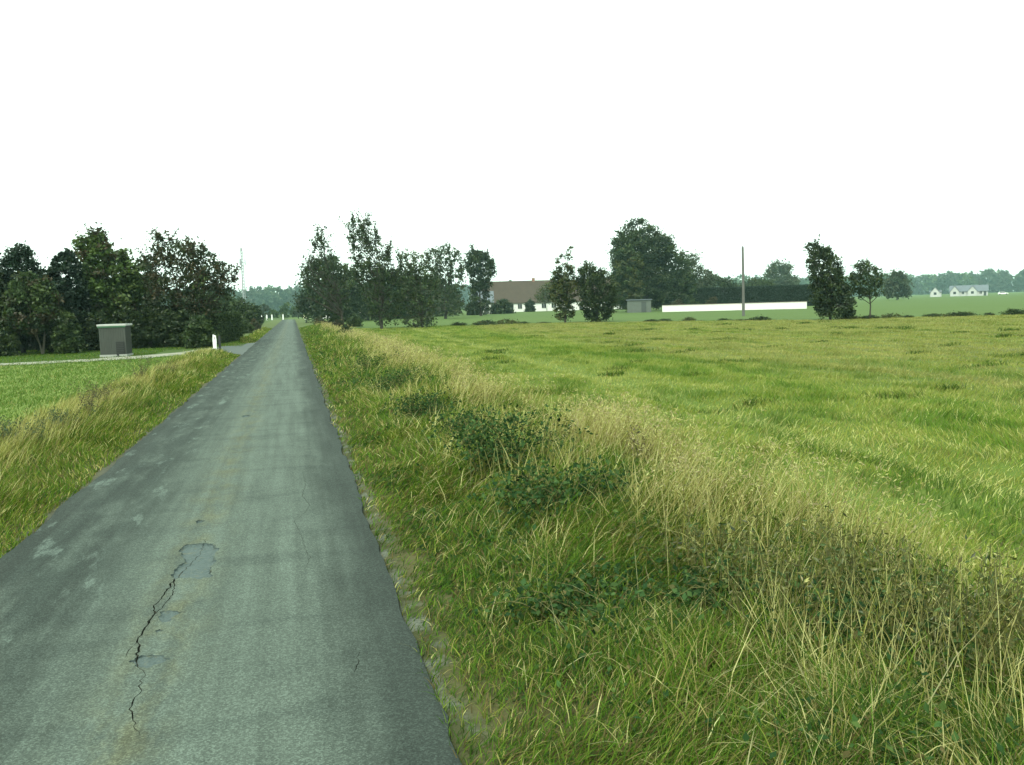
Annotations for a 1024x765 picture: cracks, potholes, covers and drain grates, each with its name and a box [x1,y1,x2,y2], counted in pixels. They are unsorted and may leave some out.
pothole [171,543,219,579]
pothole [158,610,181,623]
crack [126,539,206,735]
pothole [129,654,170,668]
